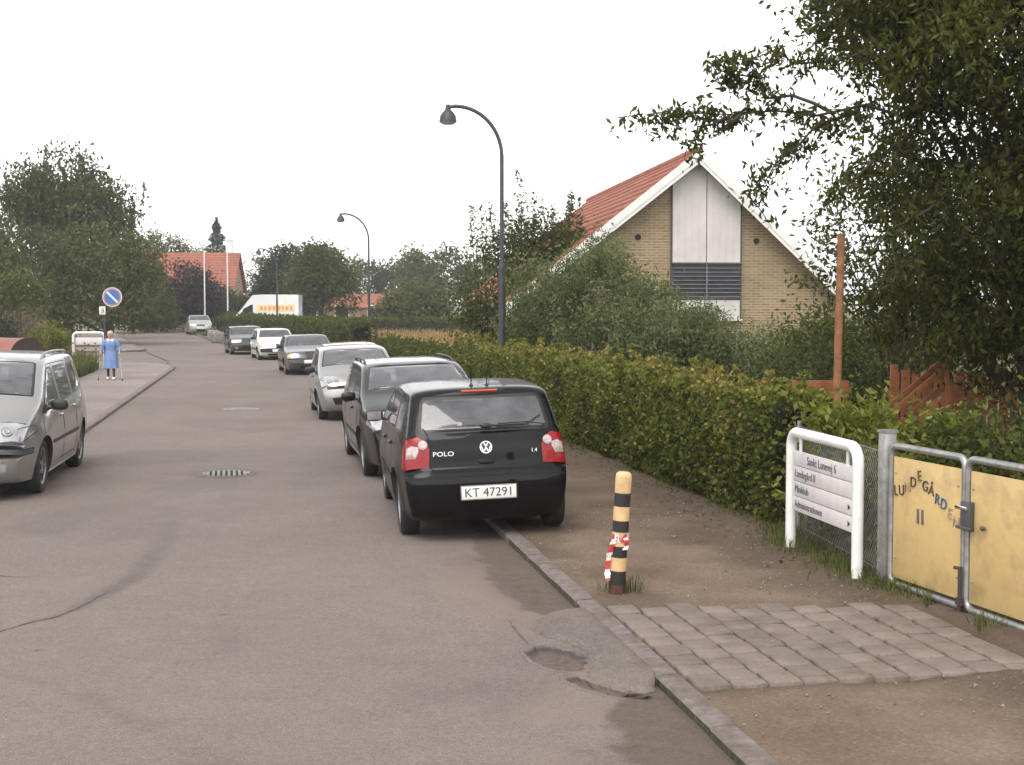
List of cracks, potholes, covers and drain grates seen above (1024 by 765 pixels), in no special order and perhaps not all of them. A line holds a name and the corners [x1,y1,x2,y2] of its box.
crack [0,591,109,631]
pothole [560,675,660,703]
pothole [520,645,591,673]
